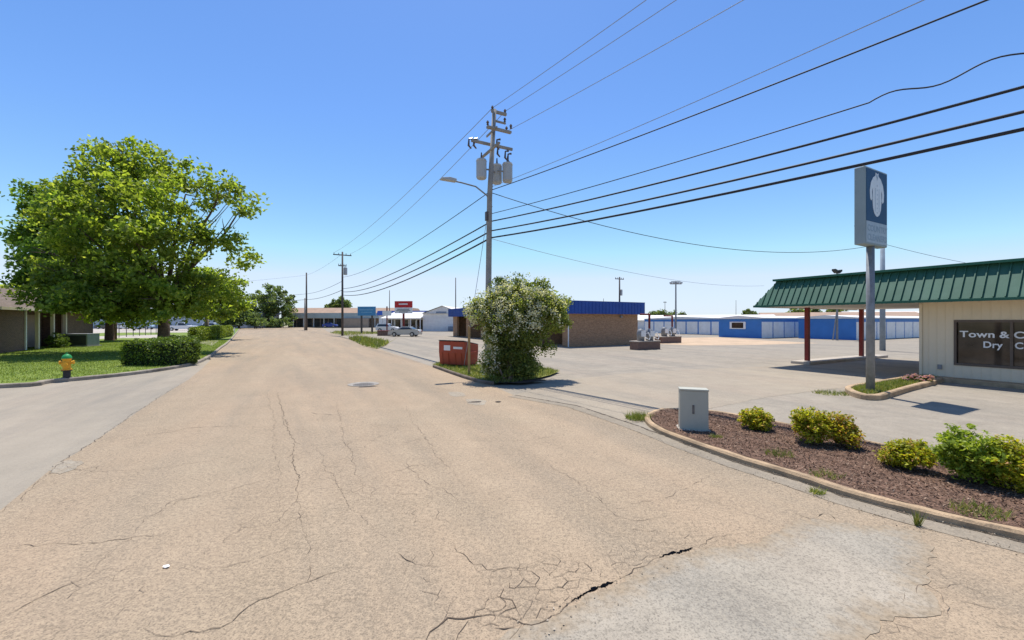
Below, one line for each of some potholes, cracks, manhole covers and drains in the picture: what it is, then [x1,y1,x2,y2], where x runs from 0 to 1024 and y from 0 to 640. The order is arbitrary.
crack [542,462,738,579]
crack [143,566,357,636]
crack [9,393,458,613]
crack [391,543,593,640]
